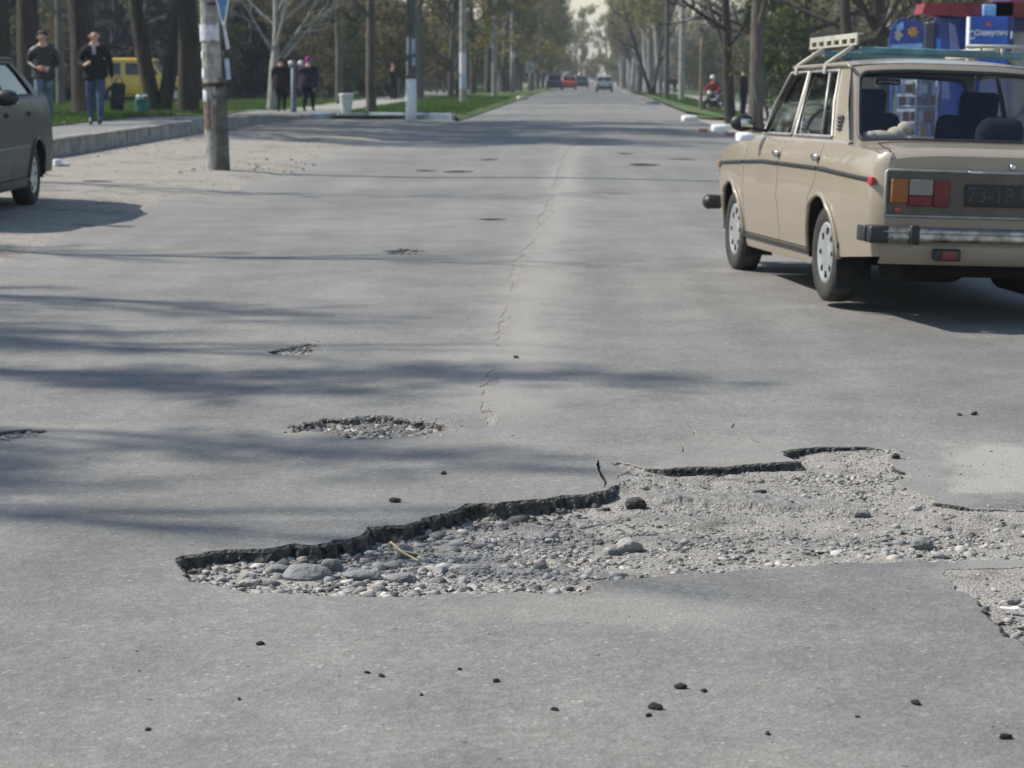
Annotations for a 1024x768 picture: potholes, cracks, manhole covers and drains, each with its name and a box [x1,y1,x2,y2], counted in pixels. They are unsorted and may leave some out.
crack [732,423,770,447]
pothole [0,429,50,441]
pothole [284,415,448,440]
crack [660,414,714,452]
pothole [267,343,320,355]
pothole [175,446,1024,597]
